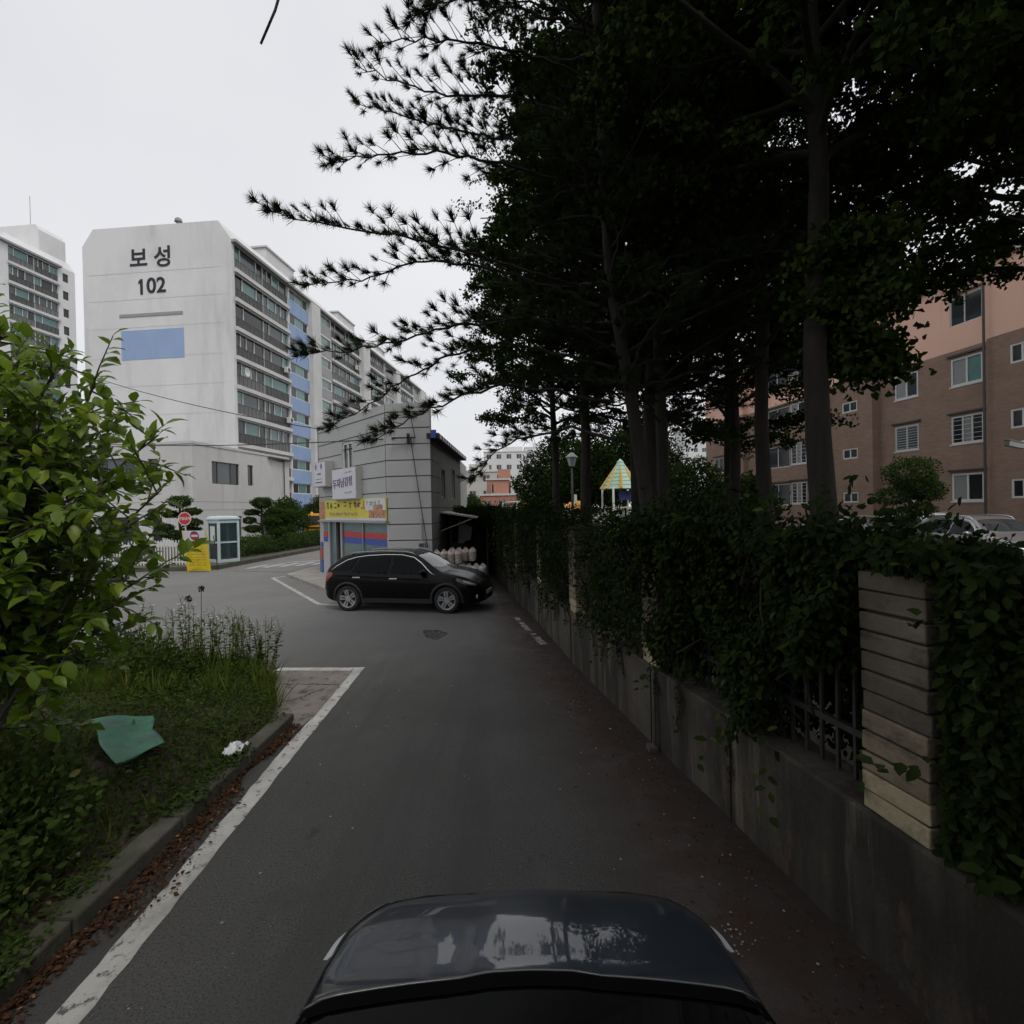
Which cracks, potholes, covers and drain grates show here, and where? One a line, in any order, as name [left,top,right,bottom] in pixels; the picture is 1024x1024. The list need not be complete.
pothole [422,630,448,640]
